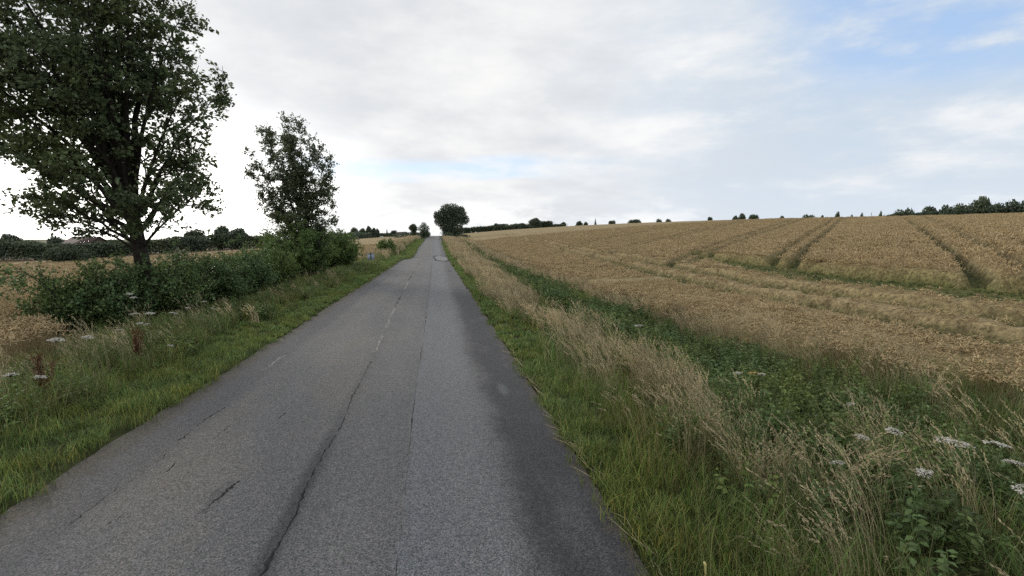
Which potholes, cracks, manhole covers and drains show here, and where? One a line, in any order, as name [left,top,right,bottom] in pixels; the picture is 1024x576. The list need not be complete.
crack [197,467,243,515]
crack [259,265,418,576]
crack [69,407,230,525]
